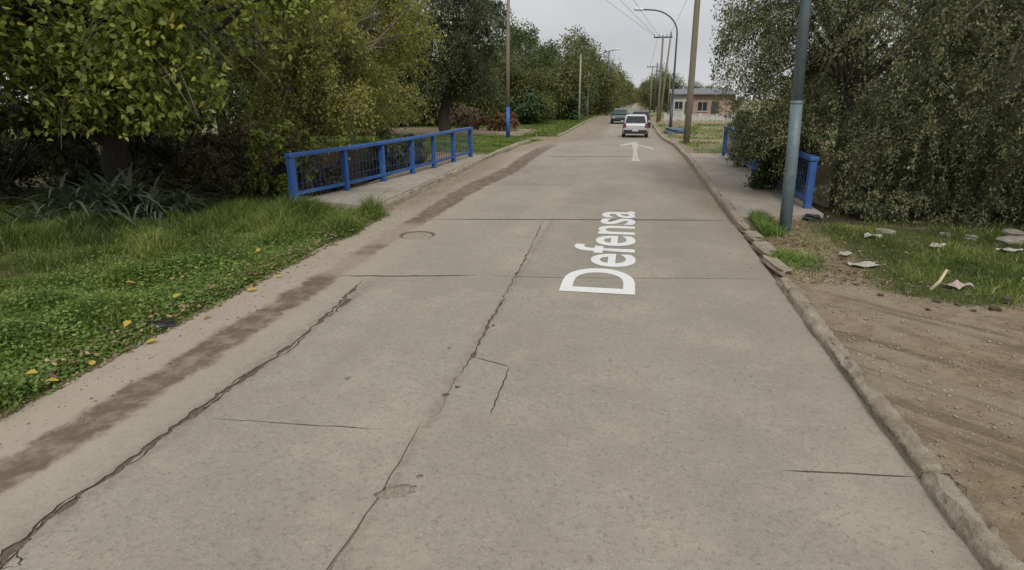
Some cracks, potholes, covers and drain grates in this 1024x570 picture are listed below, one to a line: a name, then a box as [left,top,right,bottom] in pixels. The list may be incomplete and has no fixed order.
pothole [373,474,423,500]
manhole cover [399,231,435,239]
crack [0,219,722,570]
